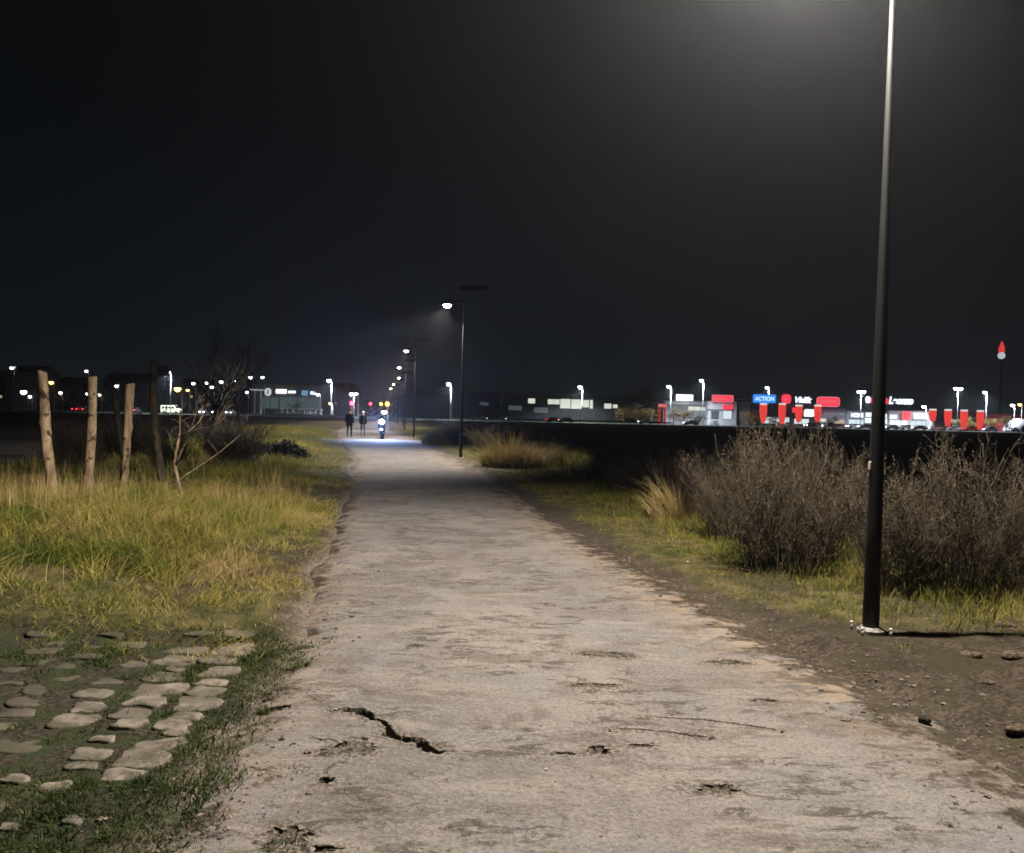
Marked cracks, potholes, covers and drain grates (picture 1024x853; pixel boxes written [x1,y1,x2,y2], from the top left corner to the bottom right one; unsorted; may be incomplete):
crack [308,706,452,777]
pothole [580,743,620,758]
pothole [688,781,749,797]
crack [610,714,783,740]
pothole [310,773,343,787]
